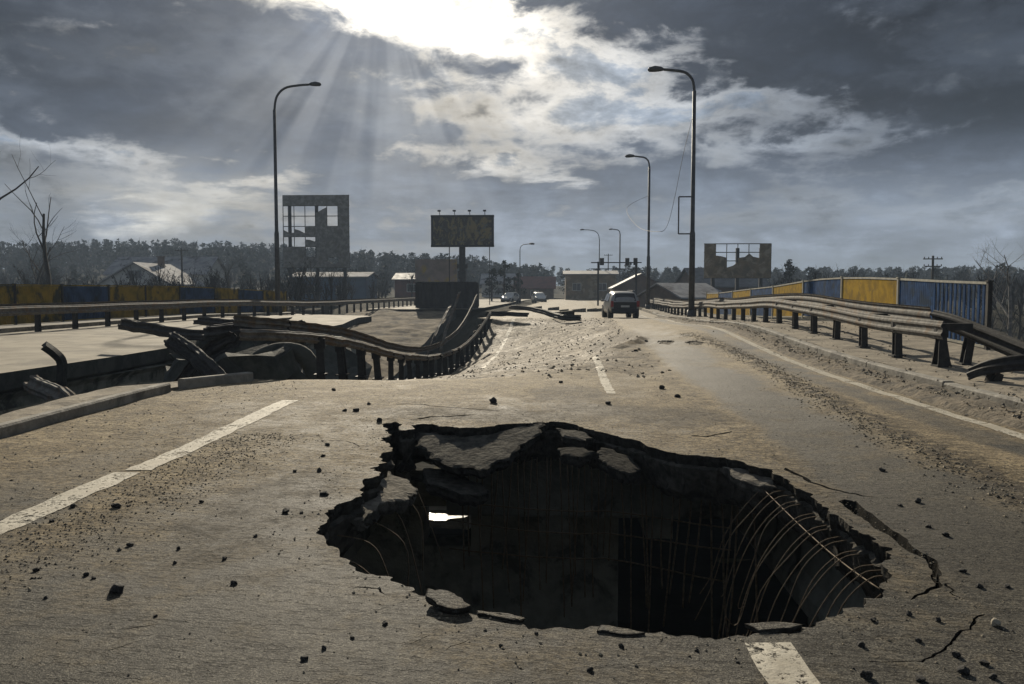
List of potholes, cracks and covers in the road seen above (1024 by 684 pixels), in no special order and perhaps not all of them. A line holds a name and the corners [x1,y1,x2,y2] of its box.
crack [784,468,985,663]
pothole [316,421,892,639]
